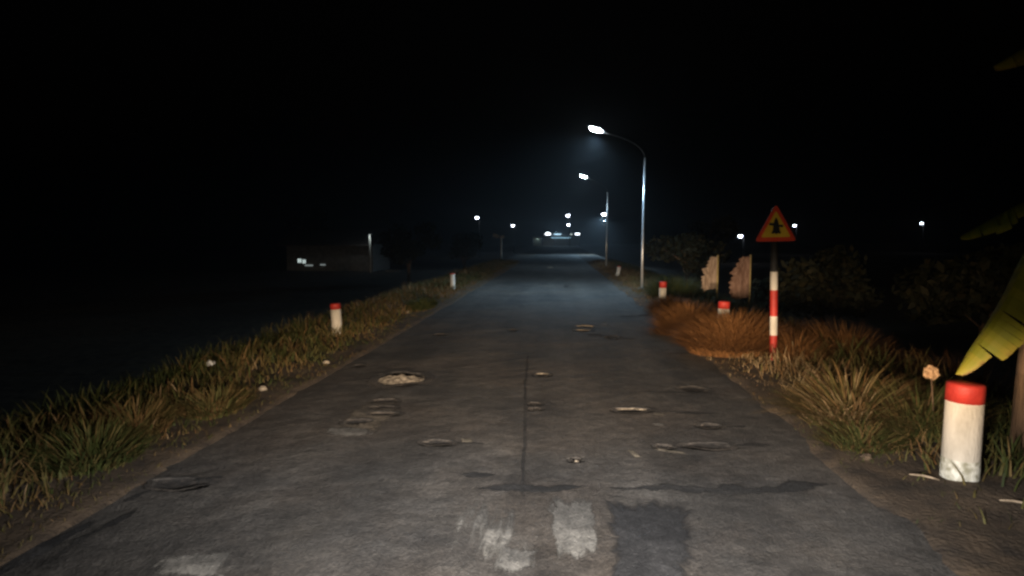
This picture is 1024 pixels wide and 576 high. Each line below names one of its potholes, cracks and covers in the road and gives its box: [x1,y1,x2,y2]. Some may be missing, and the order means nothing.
pothole [143,476,218,492]
pothole [367,369,435,388]
pothole [339,417,380,426]
pothole [417,438,458,446]
